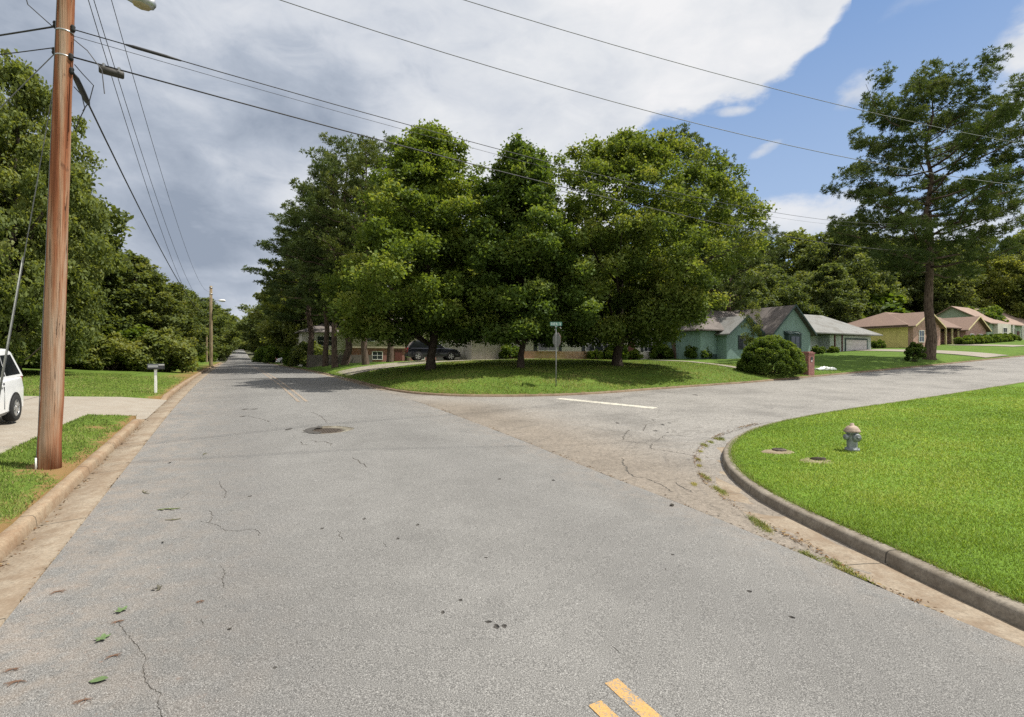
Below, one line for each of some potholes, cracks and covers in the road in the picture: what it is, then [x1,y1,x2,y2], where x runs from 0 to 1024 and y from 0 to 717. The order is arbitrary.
crack [119,624,163,717]
crack [615,422,768,493]
manhole cover [302,426,354,434]
